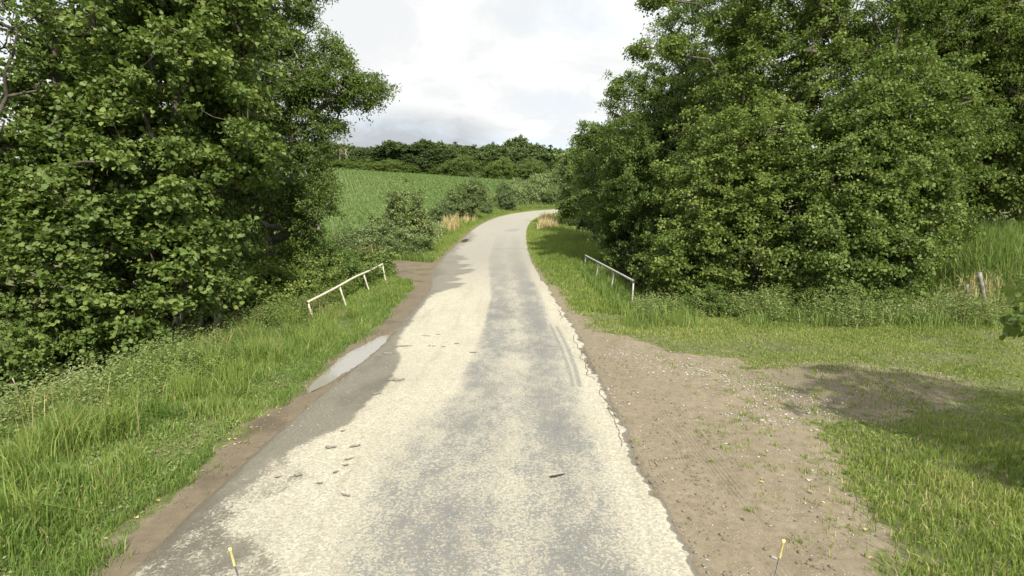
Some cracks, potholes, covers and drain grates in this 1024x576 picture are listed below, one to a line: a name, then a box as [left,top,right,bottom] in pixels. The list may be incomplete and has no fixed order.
crack [558,310,623,446]
